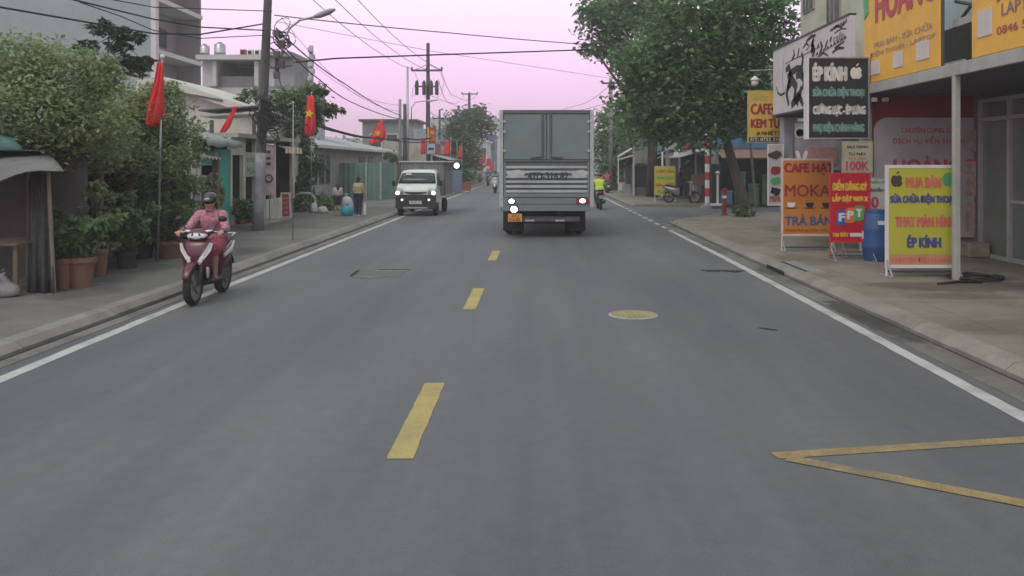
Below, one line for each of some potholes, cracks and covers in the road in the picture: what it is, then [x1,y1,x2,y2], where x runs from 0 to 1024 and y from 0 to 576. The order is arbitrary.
drain grate [767,261,826,275]
manhole cover [350,269,410,278]
manhole cover [608,310,658,319]
